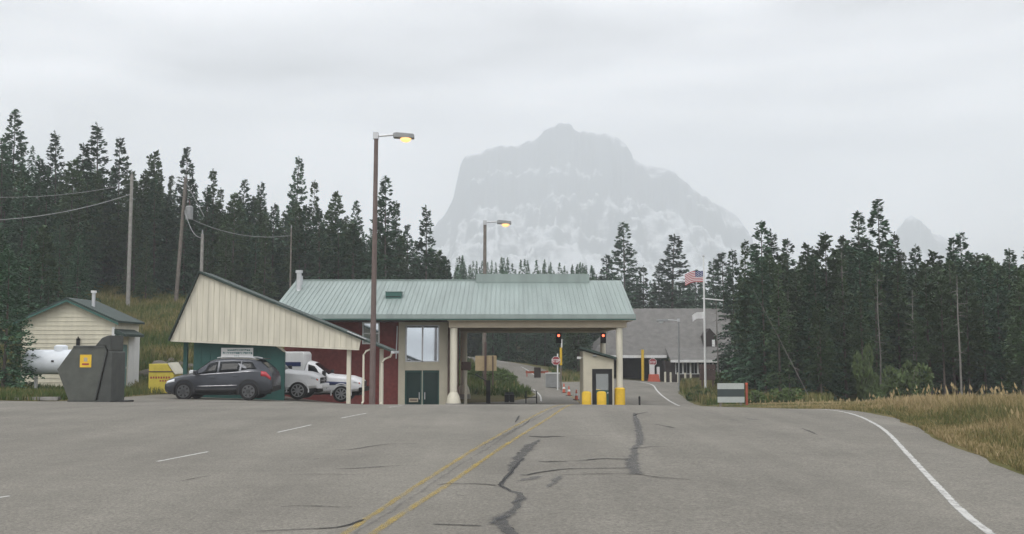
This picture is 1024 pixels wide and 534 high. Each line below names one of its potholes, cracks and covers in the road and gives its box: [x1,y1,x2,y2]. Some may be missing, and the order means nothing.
crack [265,505,364,531]
crack [438,416,680,534]
